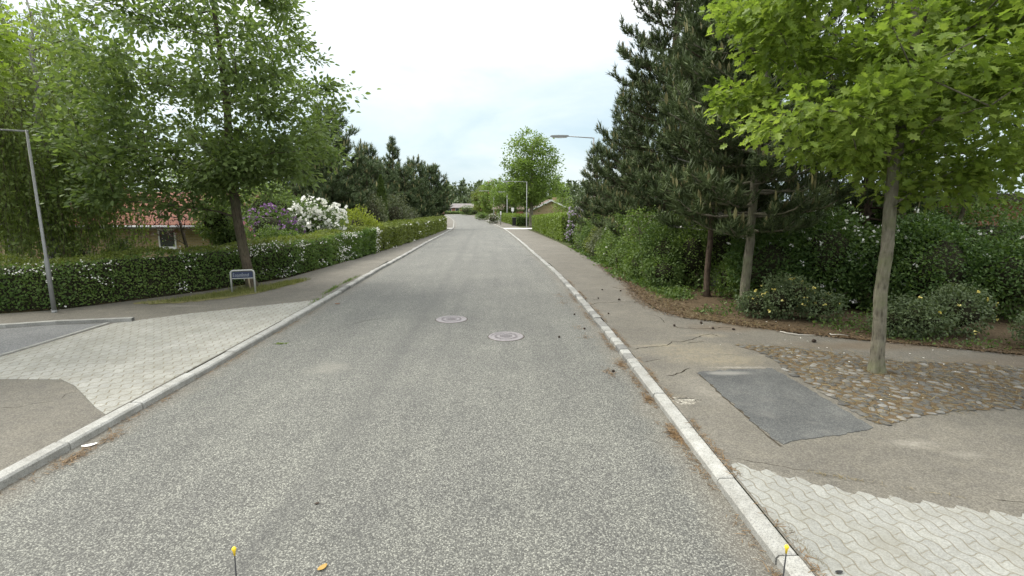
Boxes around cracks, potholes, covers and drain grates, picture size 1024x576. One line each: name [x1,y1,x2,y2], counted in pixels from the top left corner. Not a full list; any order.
manhole cover [487,332,525,341]
crack [637,317,729,376]
